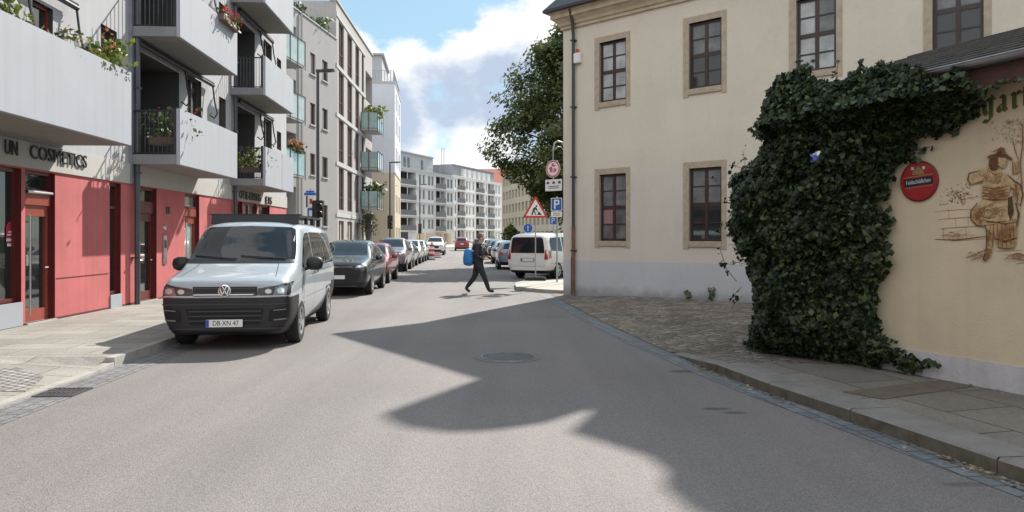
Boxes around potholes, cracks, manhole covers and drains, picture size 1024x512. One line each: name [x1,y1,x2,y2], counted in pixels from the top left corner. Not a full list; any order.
manhole cover [474,351,541,363]
drain grate [31,387,93,397]
